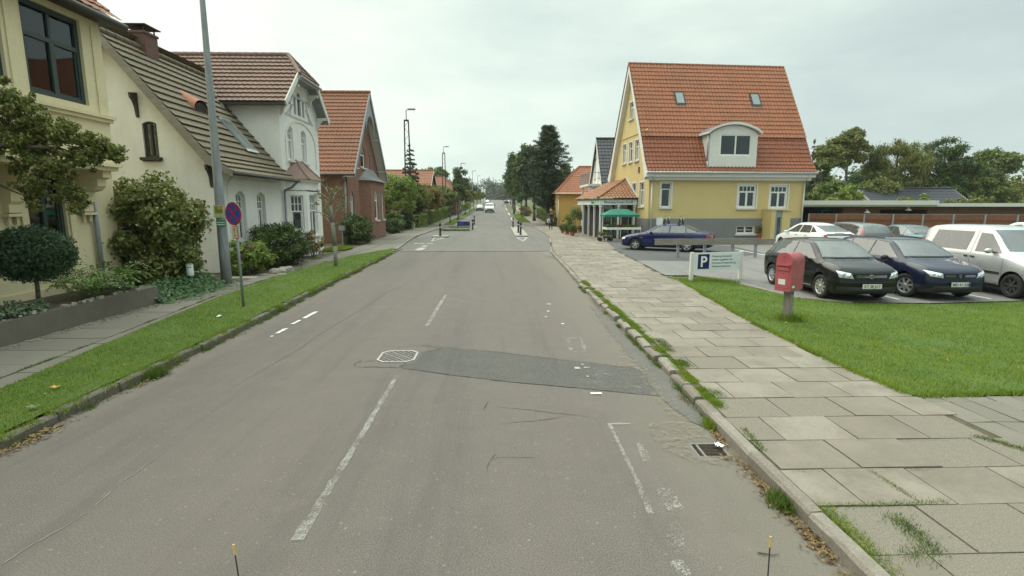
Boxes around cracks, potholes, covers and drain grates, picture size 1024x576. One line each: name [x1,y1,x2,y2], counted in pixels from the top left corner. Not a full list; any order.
manhole cover [377,350,419,363]
drain grate [689,443,730,457]
